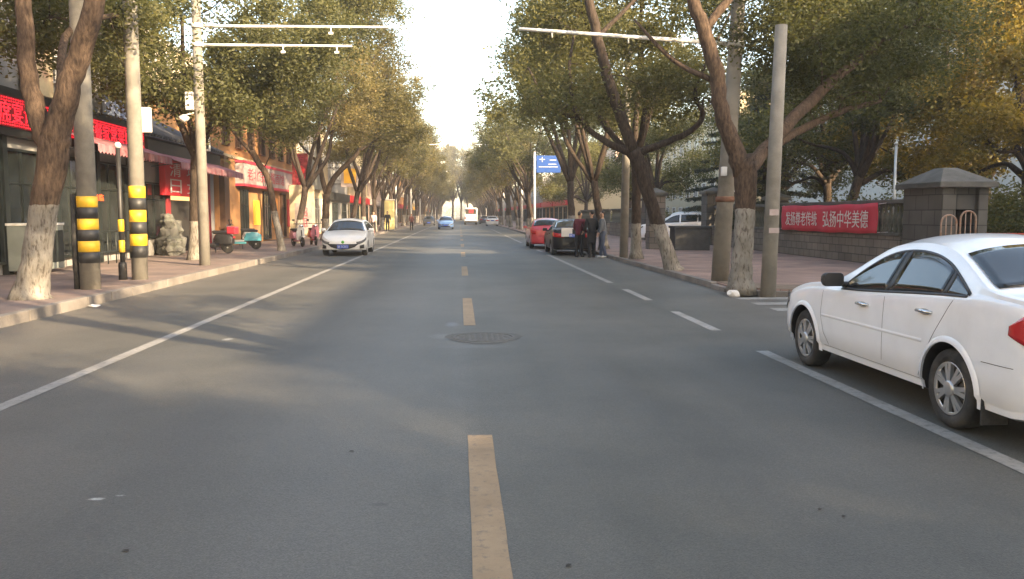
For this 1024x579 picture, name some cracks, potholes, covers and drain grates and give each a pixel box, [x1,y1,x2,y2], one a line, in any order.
manhole cover [444,332,523,344]
